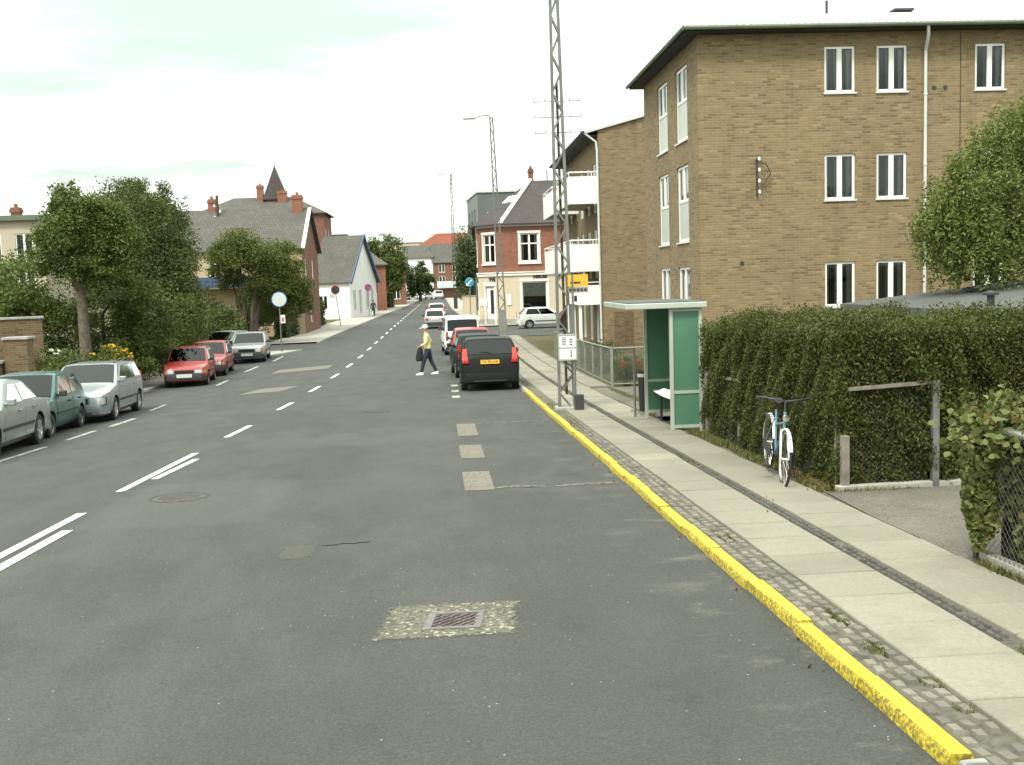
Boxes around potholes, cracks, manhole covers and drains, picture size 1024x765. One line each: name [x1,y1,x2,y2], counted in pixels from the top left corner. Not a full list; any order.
manhole cover [148,492,210,503]
